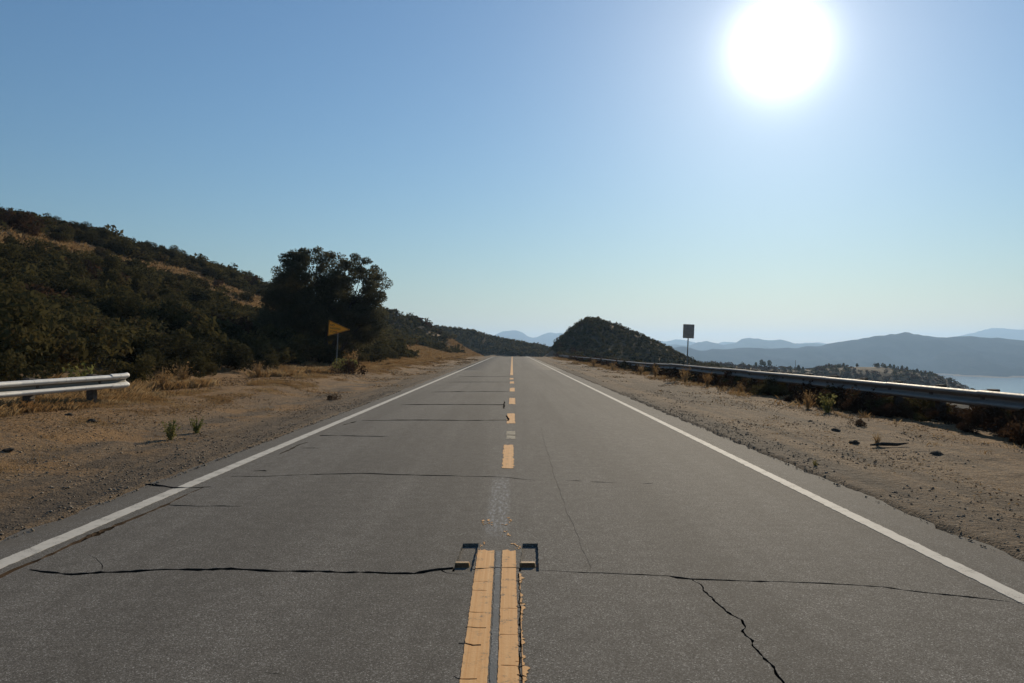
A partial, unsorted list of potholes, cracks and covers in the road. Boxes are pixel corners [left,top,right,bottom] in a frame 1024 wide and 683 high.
crack [0,484,455,578]
crack [242,376,526,480]
crack [541,428,1016,683]
